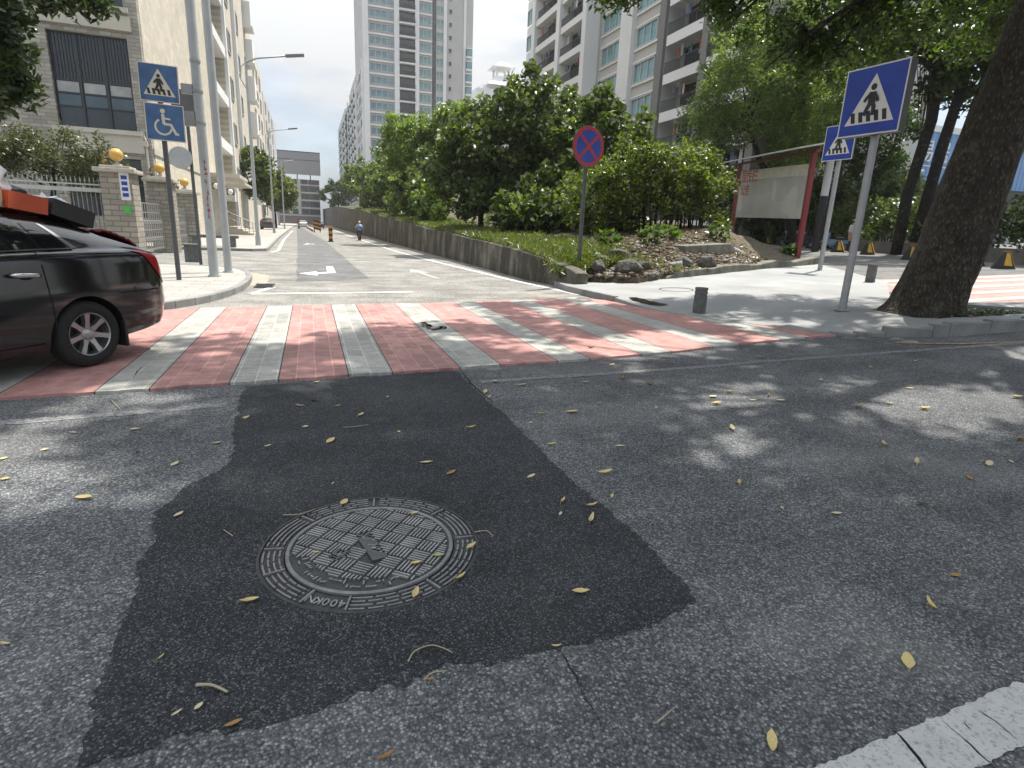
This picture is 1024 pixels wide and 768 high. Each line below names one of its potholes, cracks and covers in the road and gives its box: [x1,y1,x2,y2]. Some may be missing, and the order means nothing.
manhole cover [256,497,478,613]
